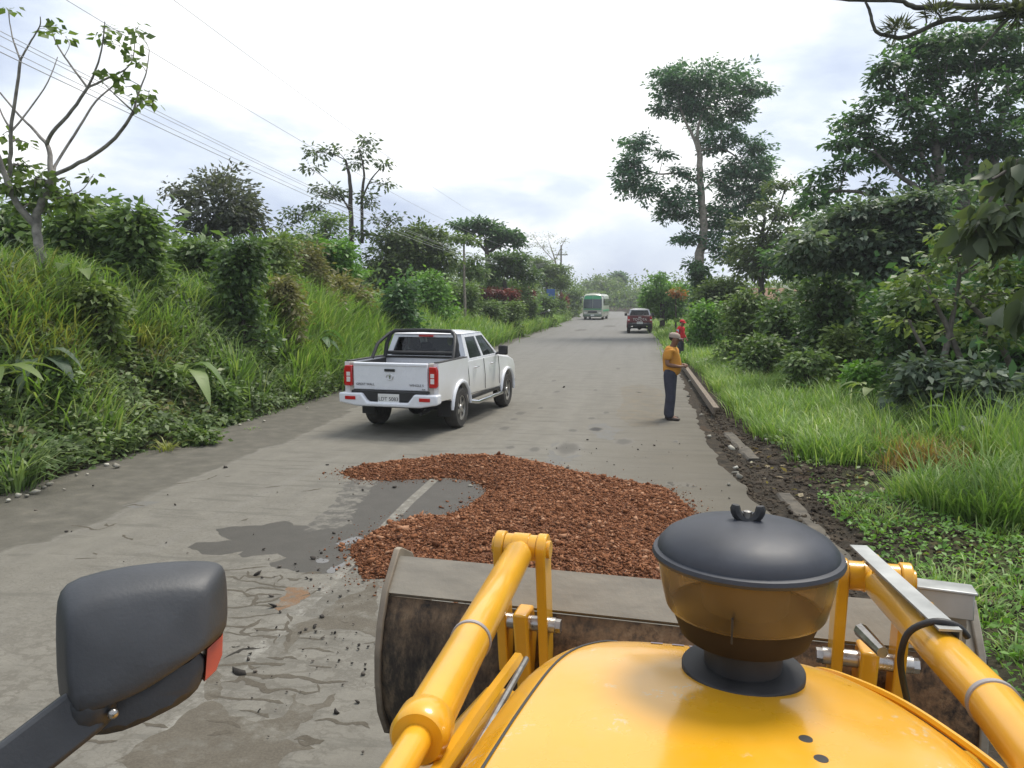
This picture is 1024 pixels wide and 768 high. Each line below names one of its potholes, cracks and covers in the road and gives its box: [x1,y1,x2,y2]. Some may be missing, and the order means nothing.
crack [294,718,370,746]
crack [207,566,350,736]
